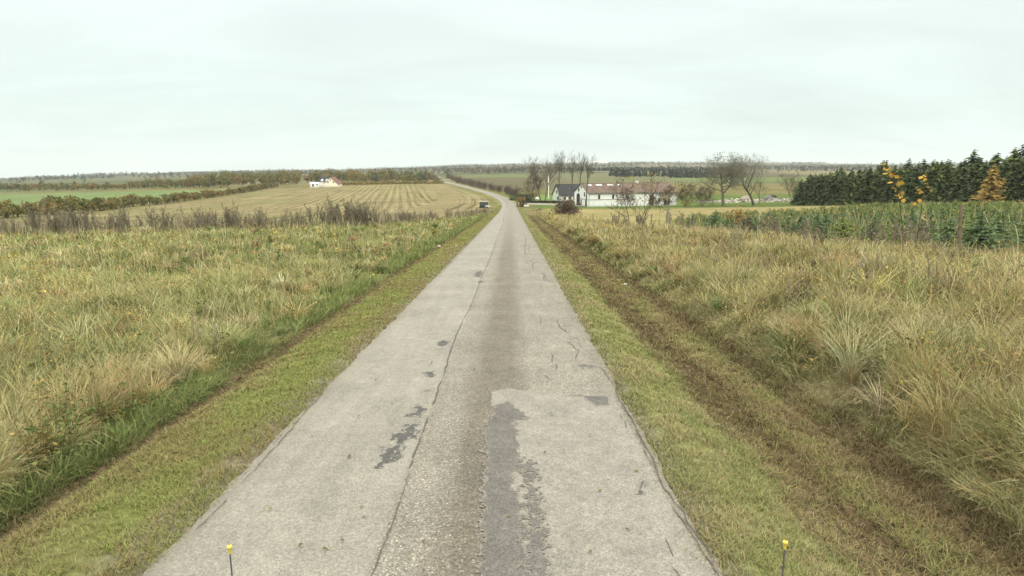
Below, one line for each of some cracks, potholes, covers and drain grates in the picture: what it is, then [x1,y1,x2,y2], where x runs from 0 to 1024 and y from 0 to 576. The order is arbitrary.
crack [538,313,720,576]
